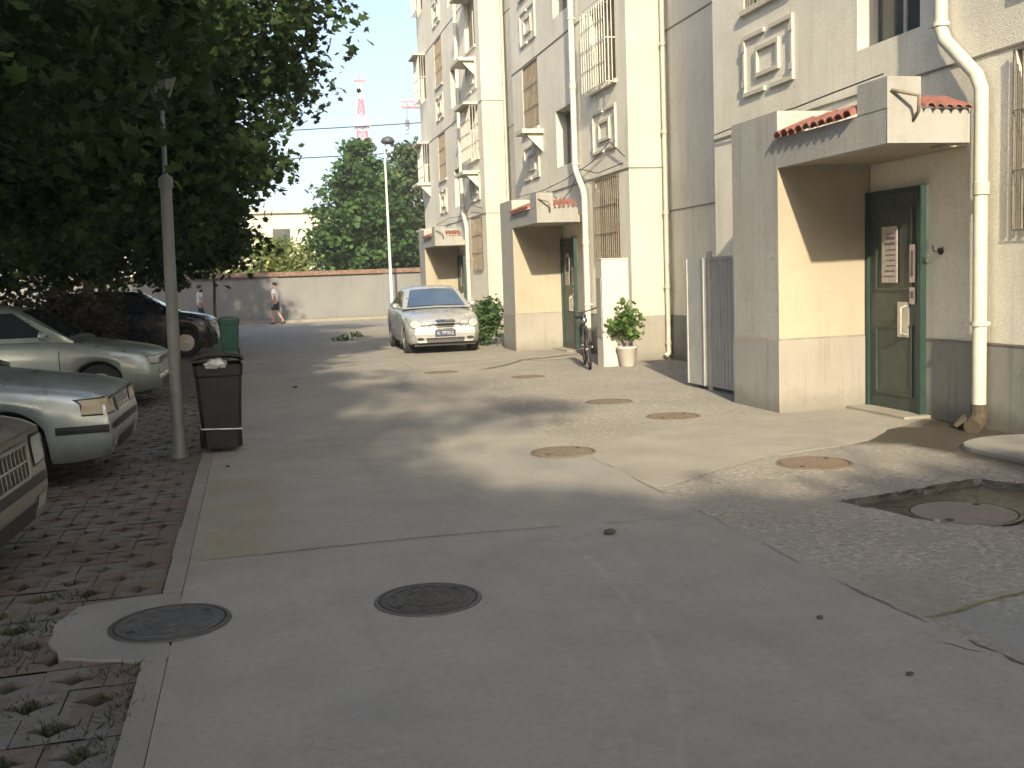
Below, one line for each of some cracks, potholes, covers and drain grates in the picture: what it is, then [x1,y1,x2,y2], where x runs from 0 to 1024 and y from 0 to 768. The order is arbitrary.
manhole cover [107,603,232,644]
manhole cover [530,446,596,458]
manhole cover [646,412,701,420]
crack [945,636,1024,665]
pothole [838,479,1024,526]
crack [593,458,1024,622]
manhole cover [776,456,854,470]
manhole cover [374,582,482,617]
manhole cover [904,500,1024,526]
